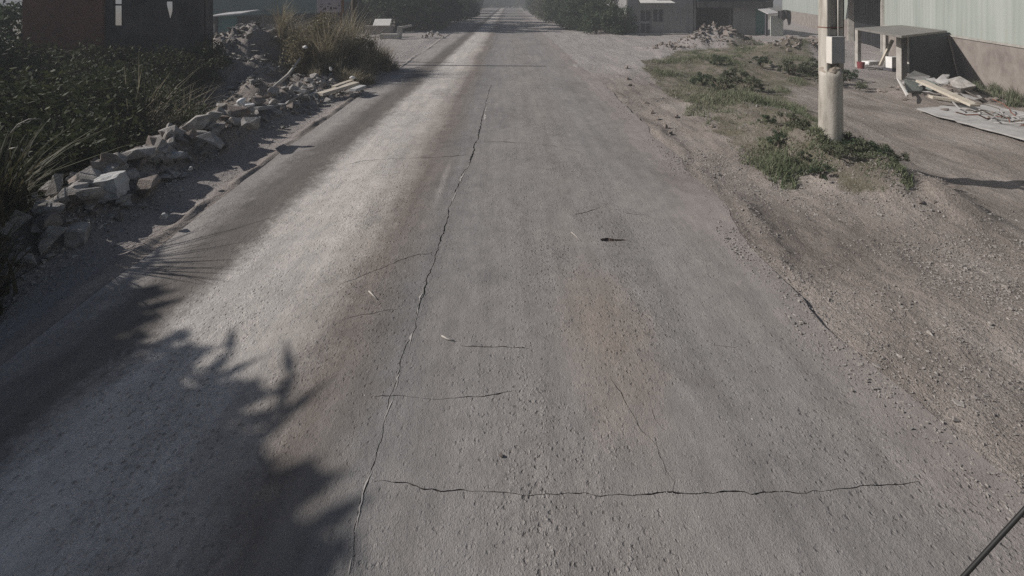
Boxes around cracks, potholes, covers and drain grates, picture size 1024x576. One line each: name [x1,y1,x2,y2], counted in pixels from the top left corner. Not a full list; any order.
crack [374,376,918,497]
